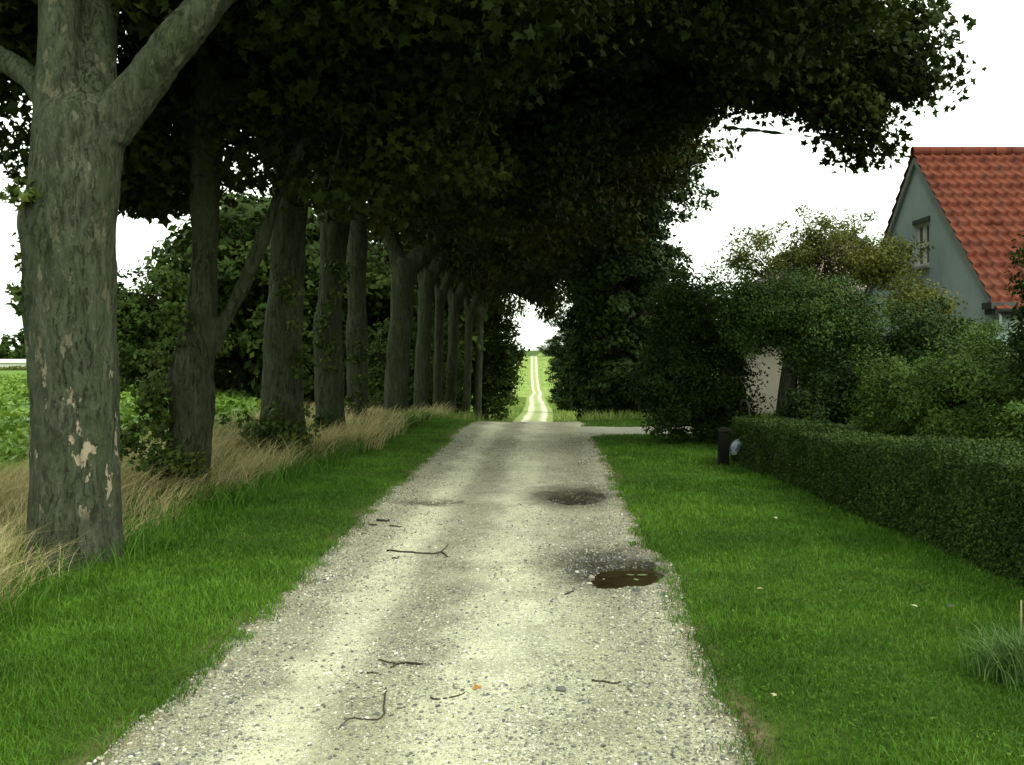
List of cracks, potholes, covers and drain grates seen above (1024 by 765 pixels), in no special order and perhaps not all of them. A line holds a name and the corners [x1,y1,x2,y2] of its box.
pothole [387,498,467,507]
pothole [551,559,673,590]
pothole [540,491,610,506]
